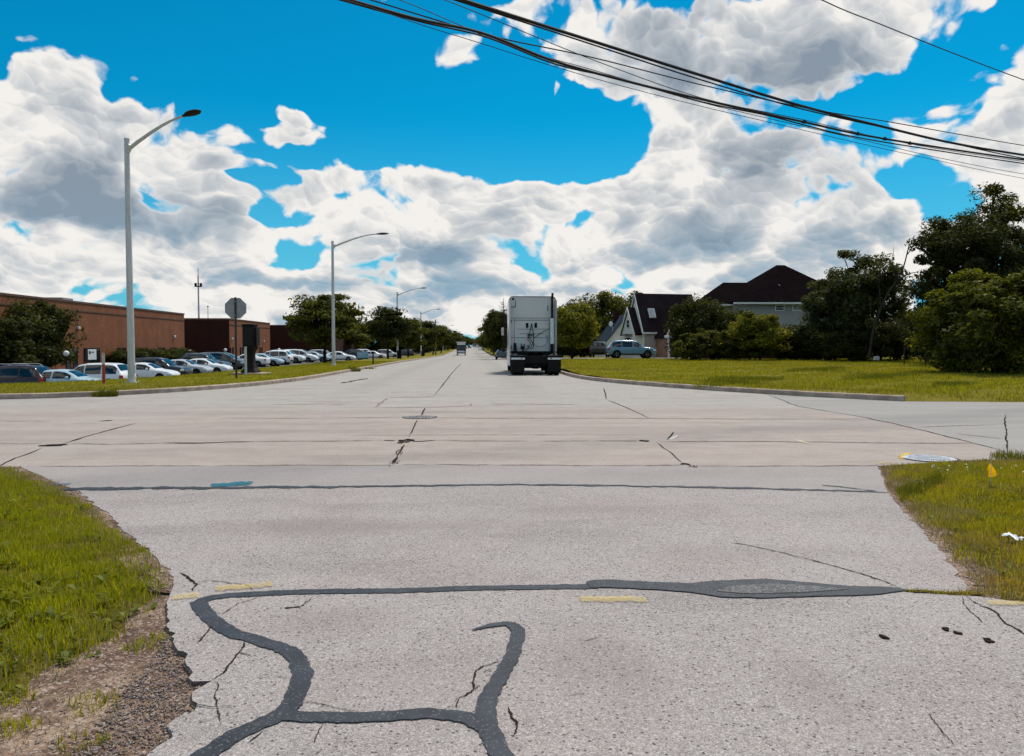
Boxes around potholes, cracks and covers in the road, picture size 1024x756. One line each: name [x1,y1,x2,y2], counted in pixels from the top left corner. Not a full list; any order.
crack [180,572,253,721]
crack [726,541,1024,634]
crack [375,369,472,463]
crack [456,661,497,707]
manhole cover [899,454,960,462]
crack [498,699,518,738]
crack [1,420,131,465]
